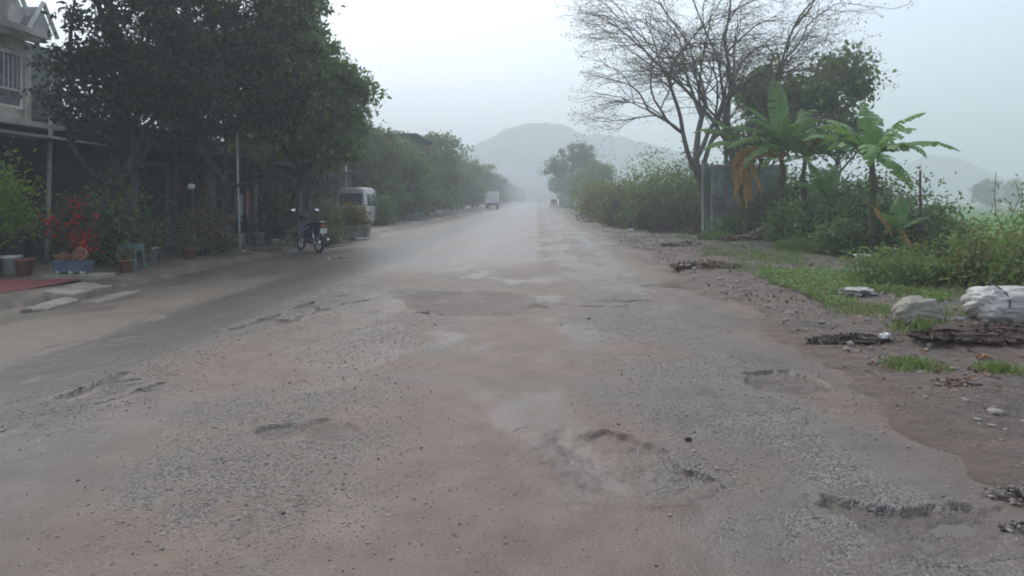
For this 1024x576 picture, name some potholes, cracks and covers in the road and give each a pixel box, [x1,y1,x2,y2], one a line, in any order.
pothole [503,421,736,509]
pothole [729,367,855,400]
pothole [234,414,371,448]
pothole [802,485,1024,568]
